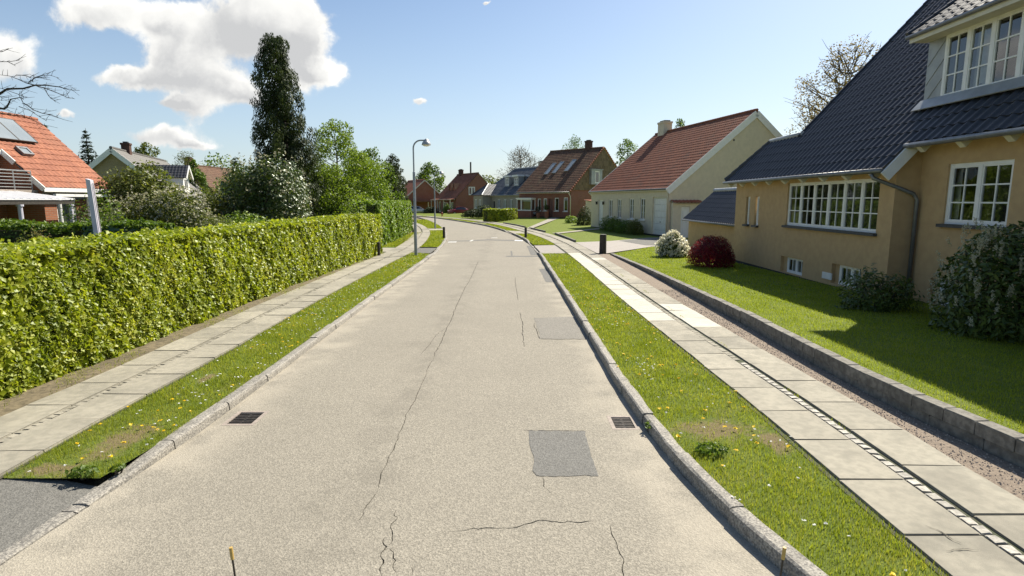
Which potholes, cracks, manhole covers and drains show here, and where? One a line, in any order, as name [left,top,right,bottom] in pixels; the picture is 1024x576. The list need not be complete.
crack [379,511,414,576]
crack [515,278,573,343]
crack [448,520,588,532]
drain grate [222,411,269,425]
drain grate [607,416,640,430]
crack [359,261,479,520]
